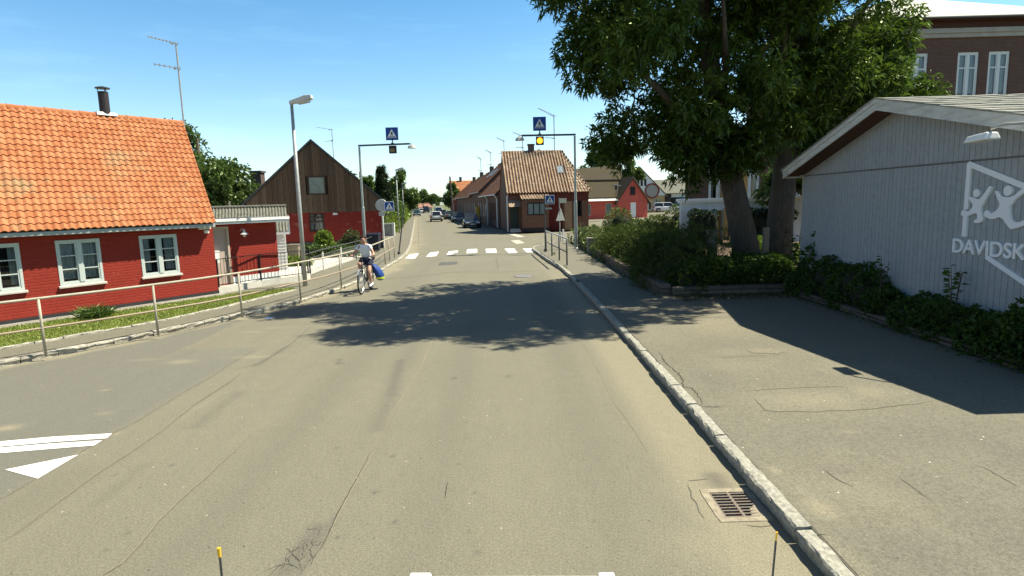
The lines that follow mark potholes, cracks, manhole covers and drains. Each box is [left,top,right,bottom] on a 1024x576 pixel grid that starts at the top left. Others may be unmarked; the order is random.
crack [688,478,771,527]
crack [267,455,369,576]
crack [659,352,720,407]
crack [101,438,247,576]
drain grate [699,488,776,523]
crack [752,386,932,412]
